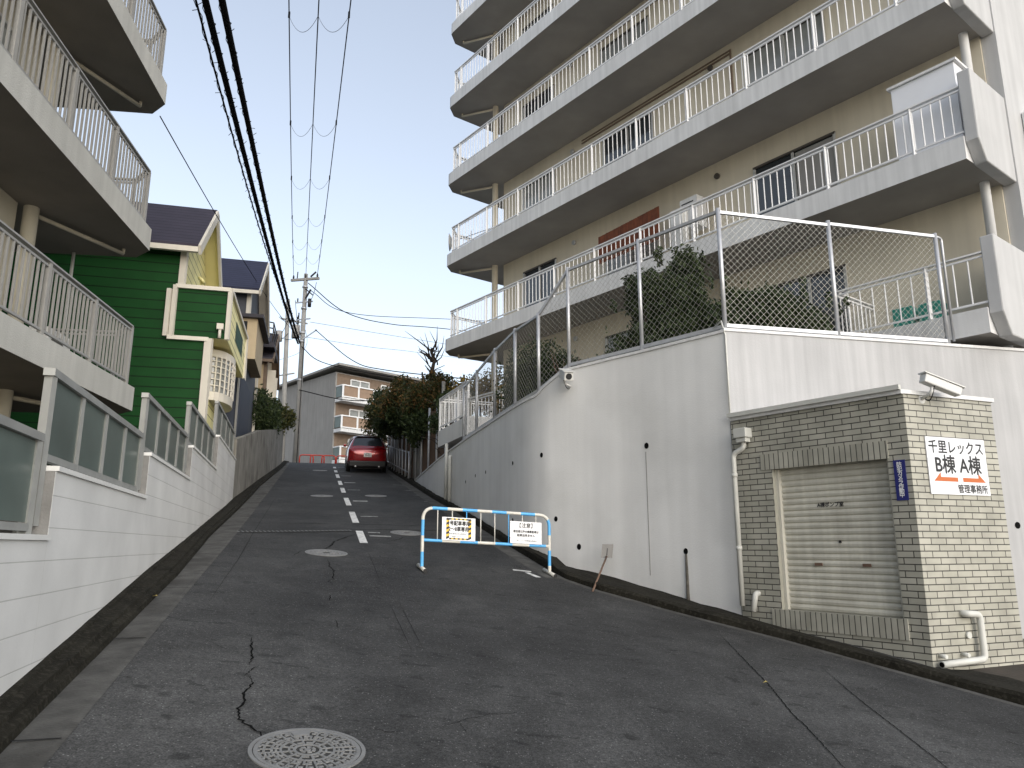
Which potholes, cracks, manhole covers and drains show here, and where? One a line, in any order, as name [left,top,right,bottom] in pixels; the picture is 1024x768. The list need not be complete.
manhole cover [247,728,366,768]
crack [207,637,296,736]
